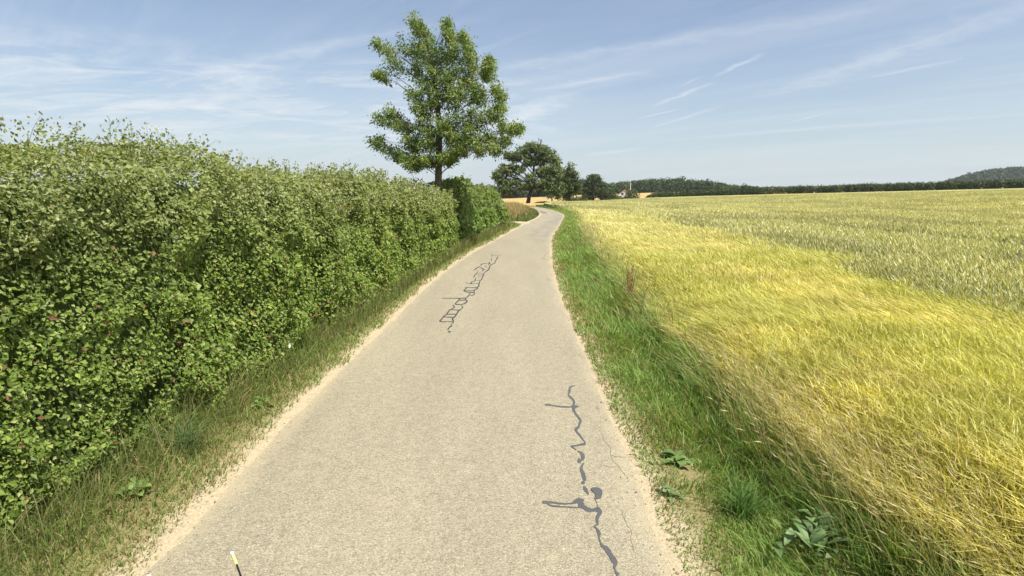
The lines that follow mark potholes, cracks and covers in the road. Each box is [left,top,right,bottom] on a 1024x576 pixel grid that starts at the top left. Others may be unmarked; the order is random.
crack [601,433,626,476]
